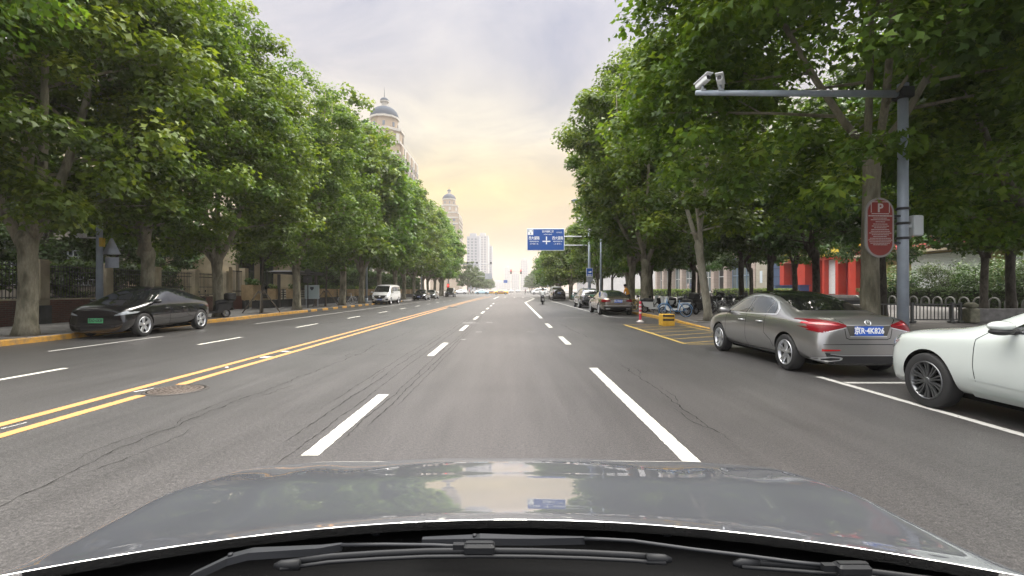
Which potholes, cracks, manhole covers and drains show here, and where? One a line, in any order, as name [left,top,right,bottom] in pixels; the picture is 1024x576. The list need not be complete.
manhole cover [141,384,210,396]
crack [620,364,728,439]
crack [1,316,481,506]
